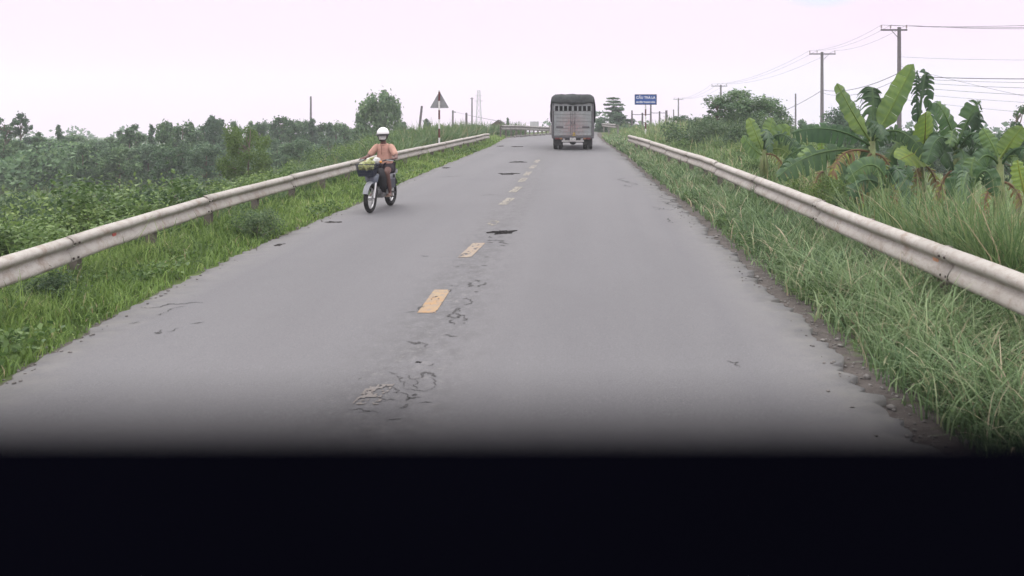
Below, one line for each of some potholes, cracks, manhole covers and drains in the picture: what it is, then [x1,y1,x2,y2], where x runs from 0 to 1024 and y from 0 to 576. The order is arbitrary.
crack [349,364,437,412]
crack [135,302,203,334]
